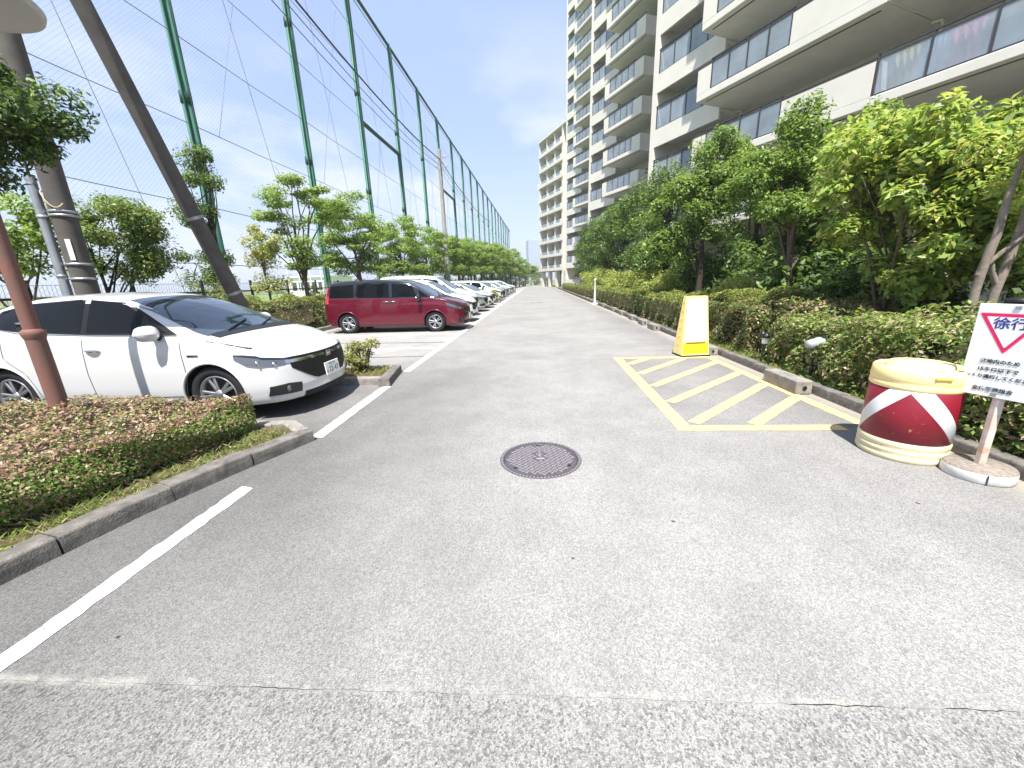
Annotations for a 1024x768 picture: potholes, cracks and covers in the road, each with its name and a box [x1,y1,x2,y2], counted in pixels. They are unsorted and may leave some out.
manhole cover [500,442,582,479]
